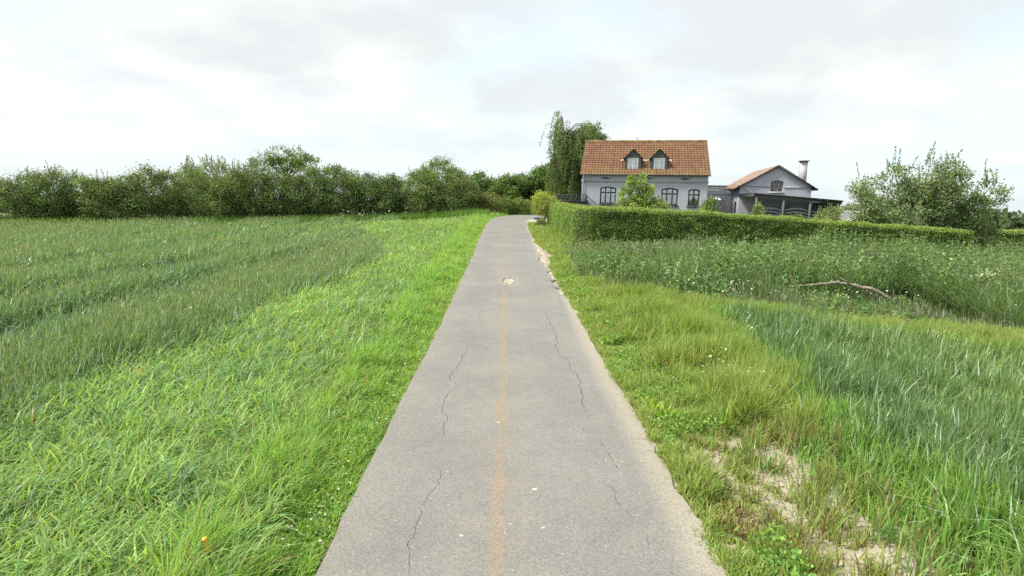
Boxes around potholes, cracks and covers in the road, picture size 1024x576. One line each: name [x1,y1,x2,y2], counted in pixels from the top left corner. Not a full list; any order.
crack [407,464,441,570]
